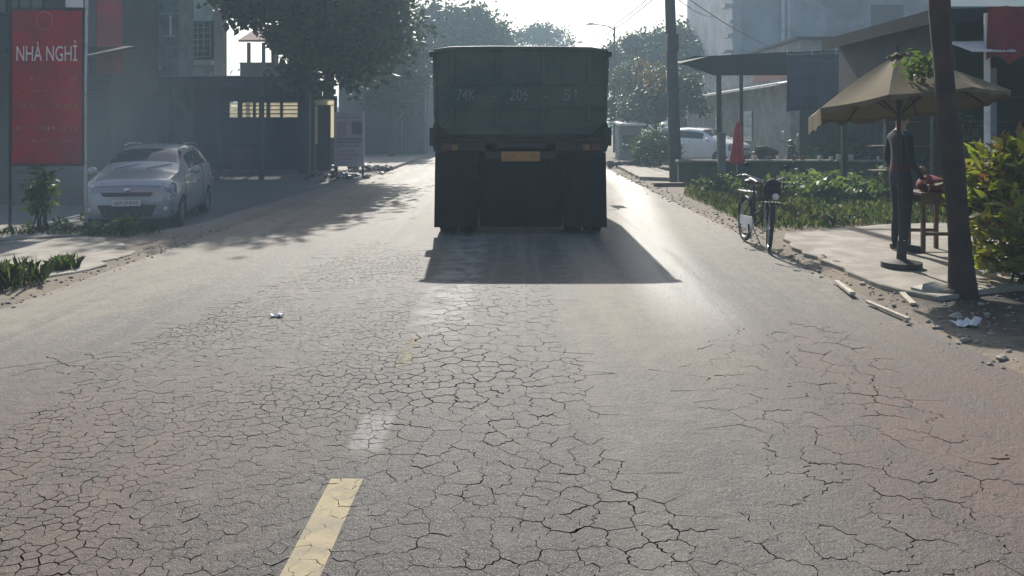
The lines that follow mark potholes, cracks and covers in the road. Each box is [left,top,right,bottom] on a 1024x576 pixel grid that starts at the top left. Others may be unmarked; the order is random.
crack [0,243,442,576]
crack [353,275,756,576]
crack [649,323,1024,576]
